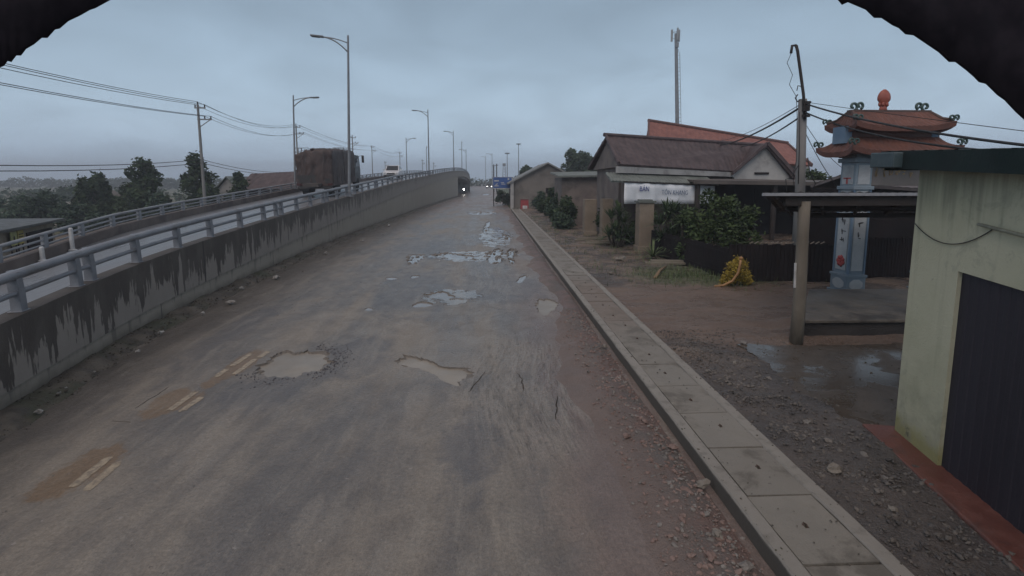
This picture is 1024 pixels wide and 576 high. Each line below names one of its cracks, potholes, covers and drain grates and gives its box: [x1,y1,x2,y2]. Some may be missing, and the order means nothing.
pothole [394,355,475,386]
pothole [432,252,476,260]
pothole [406,254,426,264]
pothole [535,298,560,315]
pothole [423,291,456,300]
pothole [505,248,519,264]
pothole [483,248,506,264]
pothole [255,350,336,378]
